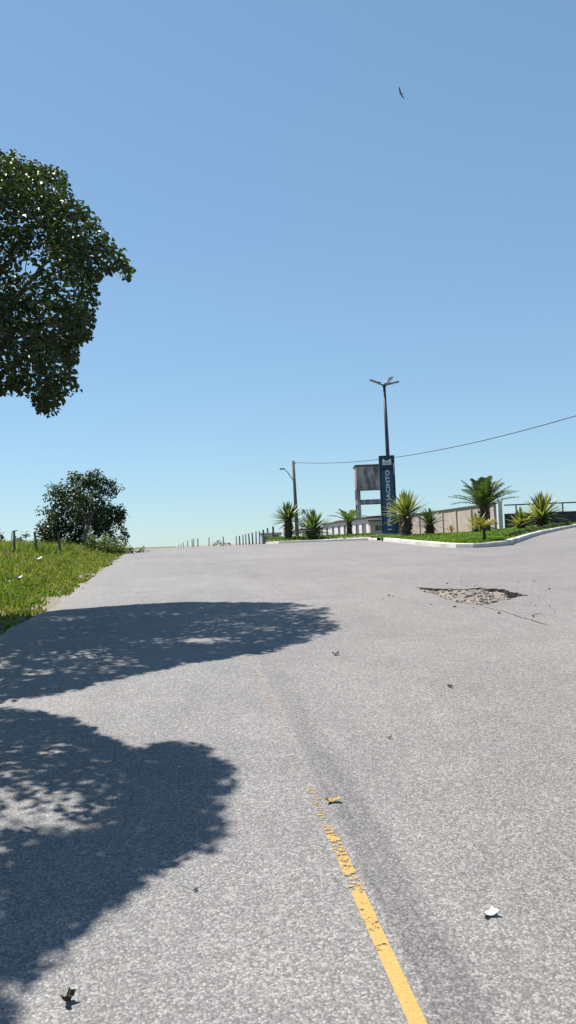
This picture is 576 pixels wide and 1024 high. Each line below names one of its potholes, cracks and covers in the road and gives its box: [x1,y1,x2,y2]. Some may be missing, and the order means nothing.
pothole [416,587,528,605]
